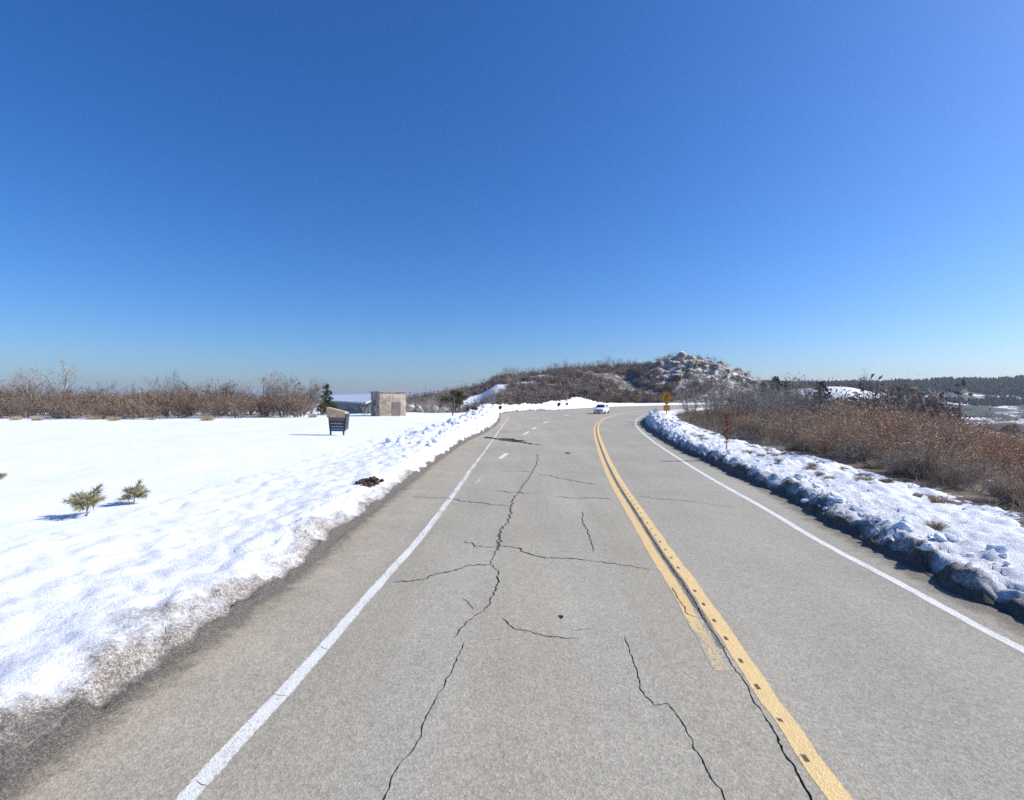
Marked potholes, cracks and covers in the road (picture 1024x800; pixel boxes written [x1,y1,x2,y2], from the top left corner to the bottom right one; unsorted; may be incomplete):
crack [382,437,654,800]
crack [624,636,726,800]
